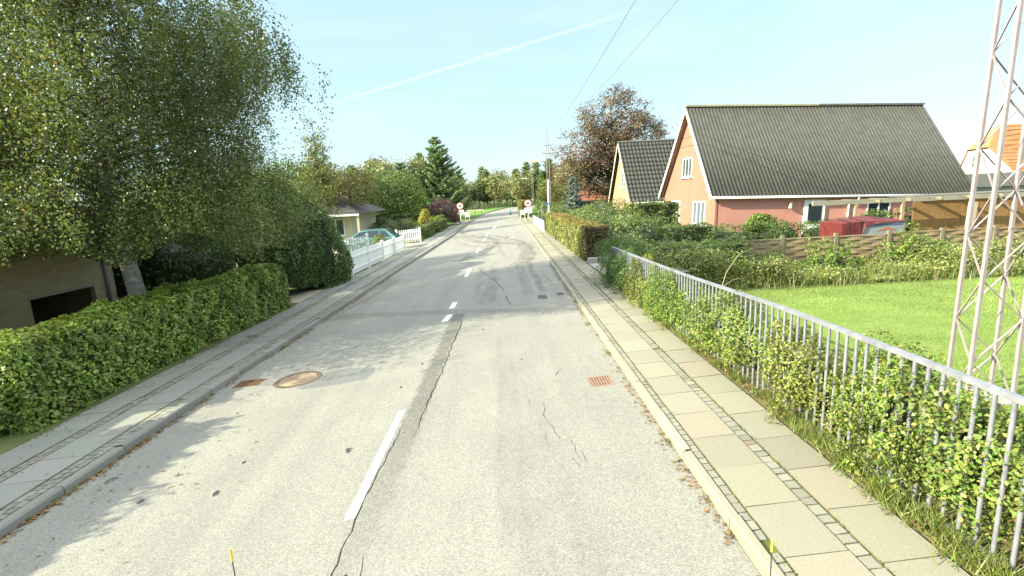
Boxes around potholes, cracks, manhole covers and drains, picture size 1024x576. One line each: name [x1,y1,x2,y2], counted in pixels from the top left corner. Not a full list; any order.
drain grate [587,375,615,387]
manhole cover [273,371,323,389]
crack [529,401,586,467]
crack [330,315,464,576]
drain grate [233,378,267,388]
